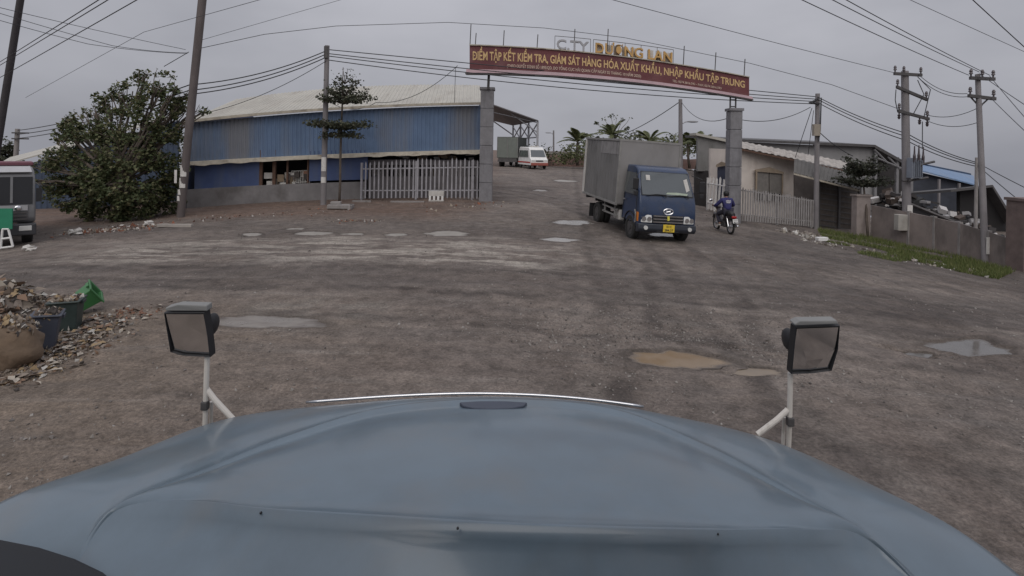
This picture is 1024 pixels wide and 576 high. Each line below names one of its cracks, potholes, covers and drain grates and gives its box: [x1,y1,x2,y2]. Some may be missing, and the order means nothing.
pothole [218,313,345,331]
pothole [680,366,794,378]
pothole [612,346,752,373]
pothole [897,351,943,359]
pothole [908,335,1024,359]
